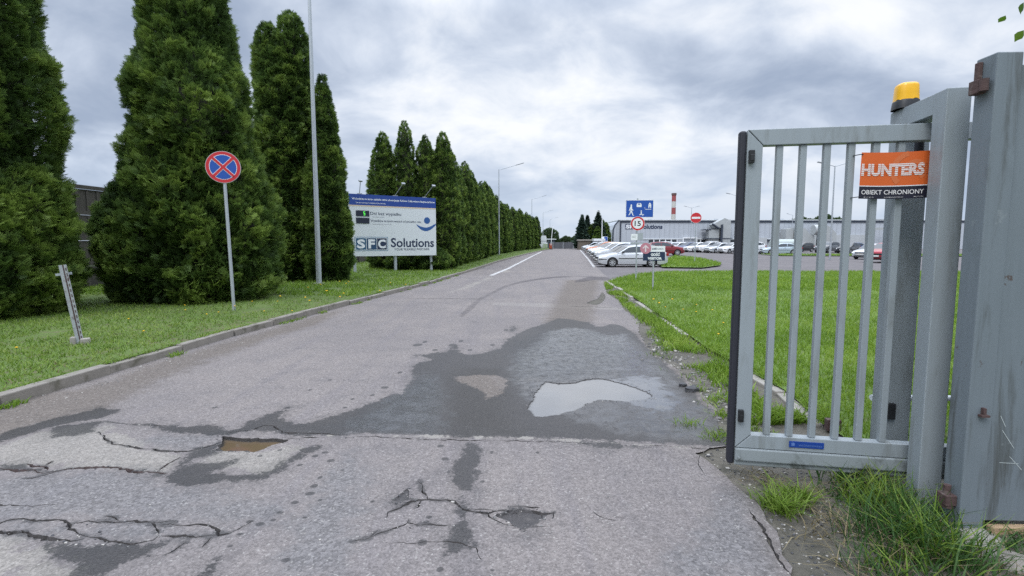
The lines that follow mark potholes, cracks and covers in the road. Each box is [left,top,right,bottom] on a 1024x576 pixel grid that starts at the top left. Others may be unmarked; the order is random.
crack [749,510,791,575]
pothole [527,378,652,417]
crack [0,422,219,479]
crack [0,504,252,555]
crack [355,481,556,559]
pothole [215,436,288,452]
pothole [495,509,543,529]
